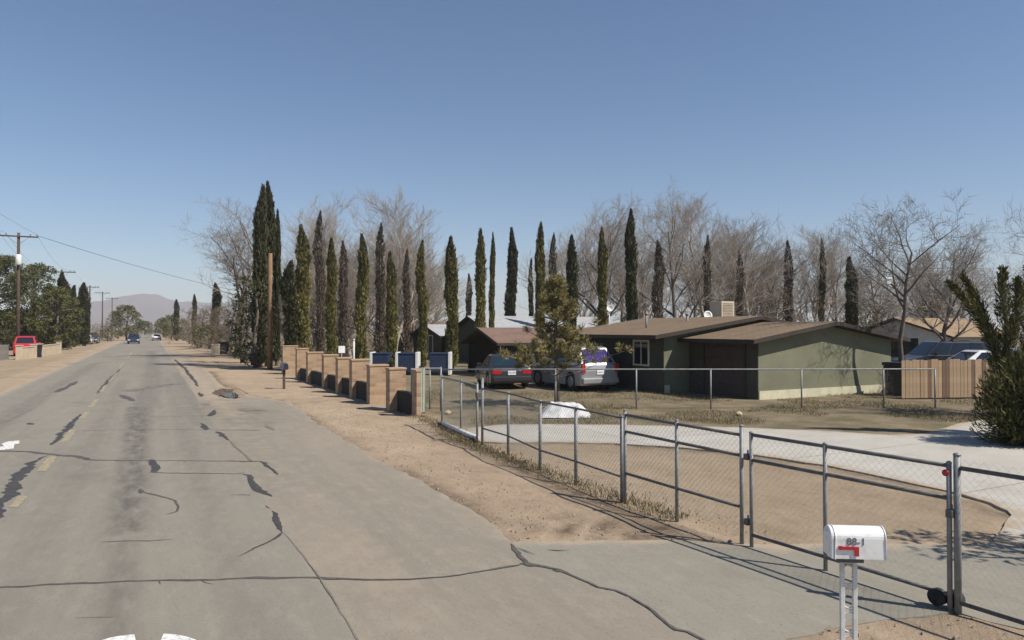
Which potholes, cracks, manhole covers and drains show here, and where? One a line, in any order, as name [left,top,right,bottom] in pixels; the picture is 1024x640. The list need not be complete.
crack [0,451,278,514]
crack [0,564,521,588]
pothole [212,388,249,399]
crack [54,381,78,392]
